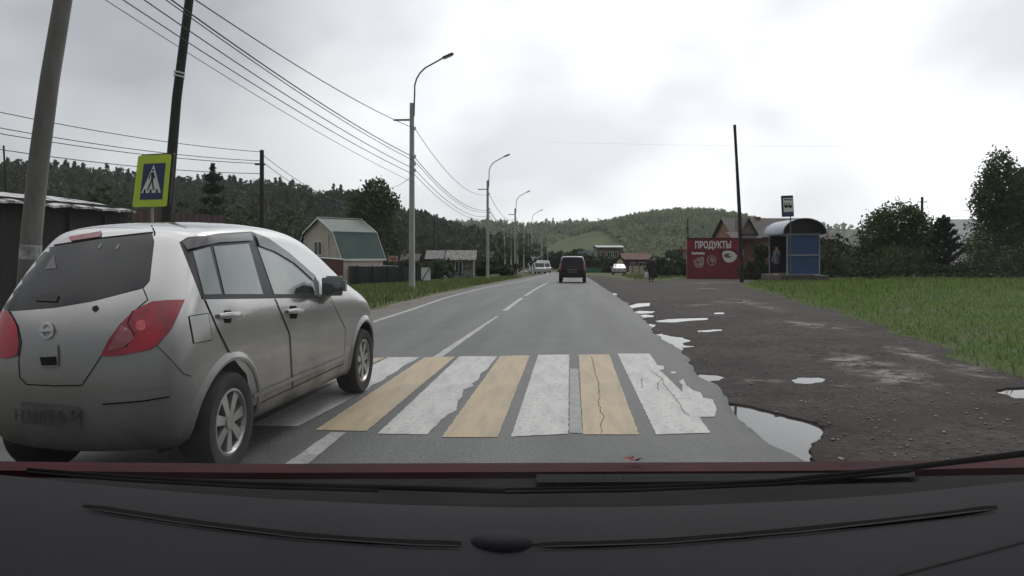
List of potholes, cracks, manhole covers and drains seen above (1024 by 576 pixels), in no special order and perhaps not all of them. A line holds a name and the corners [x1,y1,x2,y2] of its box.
pothole [656,333,695,350]
pothole [728,403,825,462]
pothole [996,387,1024,398]
